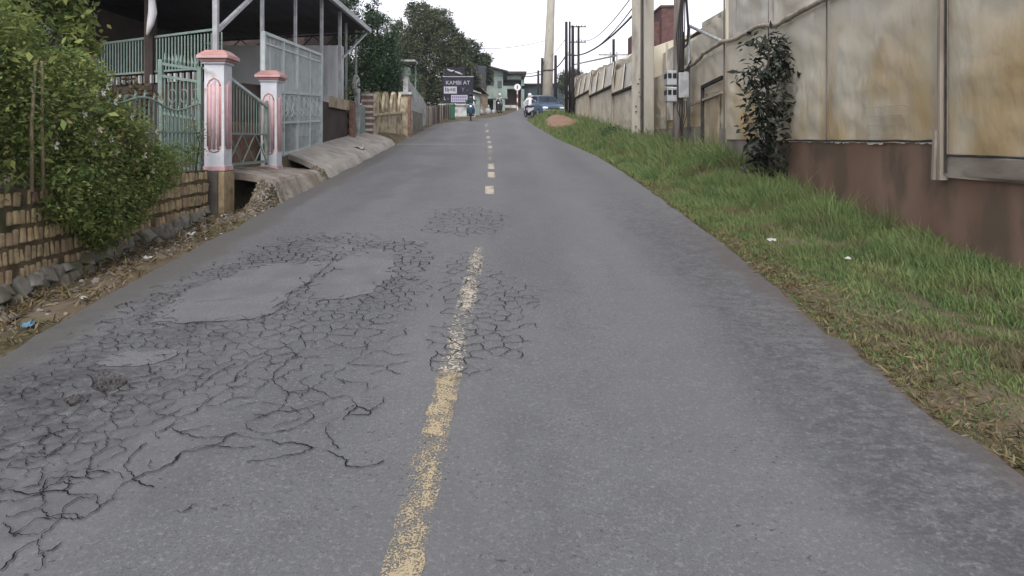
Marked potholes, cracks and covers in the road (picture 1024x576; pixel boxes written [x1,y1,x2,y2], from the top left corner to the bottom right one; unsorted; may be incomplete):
pothole [90,372,134,394]
crack [424,207,507,236]
crack [428,252,546,380]
pothole [61,394,92,407]
